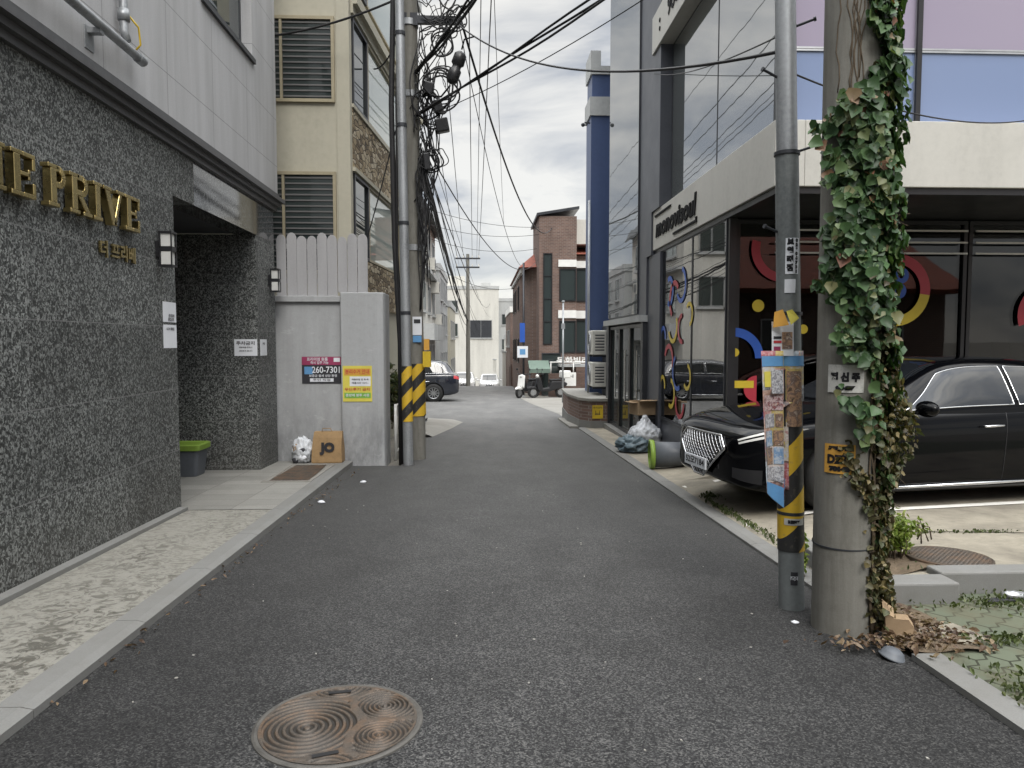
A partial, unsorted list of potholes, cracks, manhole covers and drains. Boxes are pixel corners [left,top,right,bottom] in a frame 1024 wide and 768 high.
manhole cover [251,684,423,768]
manhole cover [904,546,995,565]
